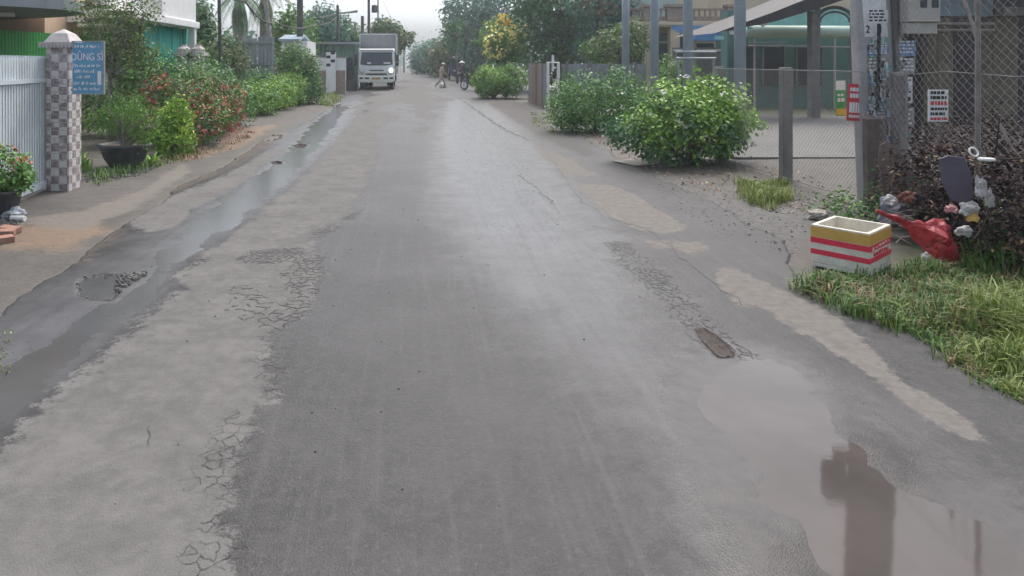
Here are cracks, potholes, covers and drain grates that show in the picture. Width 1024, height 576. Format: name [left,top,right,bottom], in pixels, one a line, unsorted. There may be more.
crack [228,206,359,330]
crack [177,506,249,576]
pothole [76,274,118,300]
crack [604,241,762,360]
crack [457,98,531,141]
